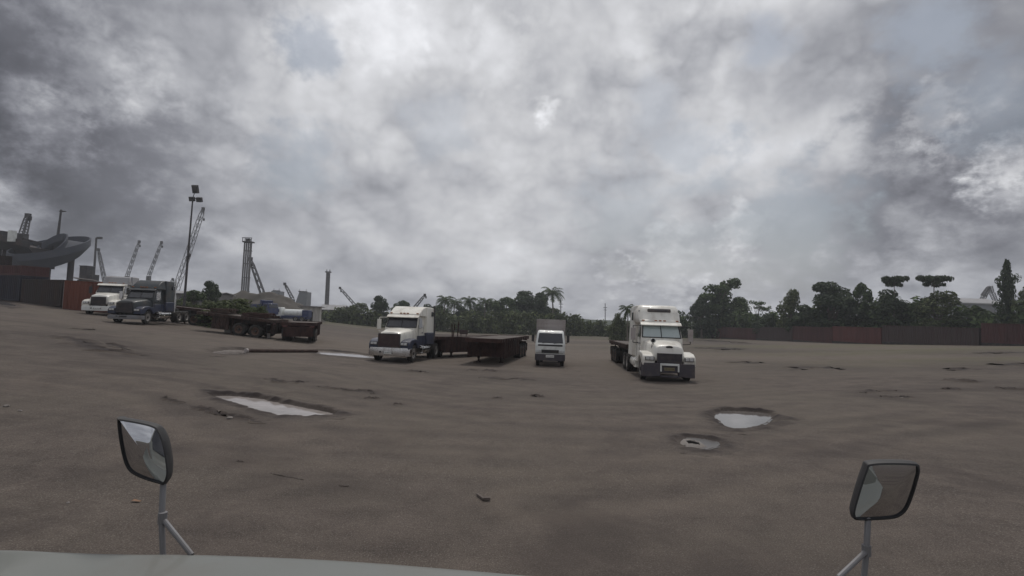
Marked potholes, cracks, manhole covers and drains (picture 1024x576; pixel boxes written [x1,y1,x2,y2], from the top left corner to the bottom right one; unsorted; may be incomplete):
pothole [191,388,364,420]
pothole [694,406,810,434]
pothole [659,432,745,456]
pothole [305,349,391,361]
